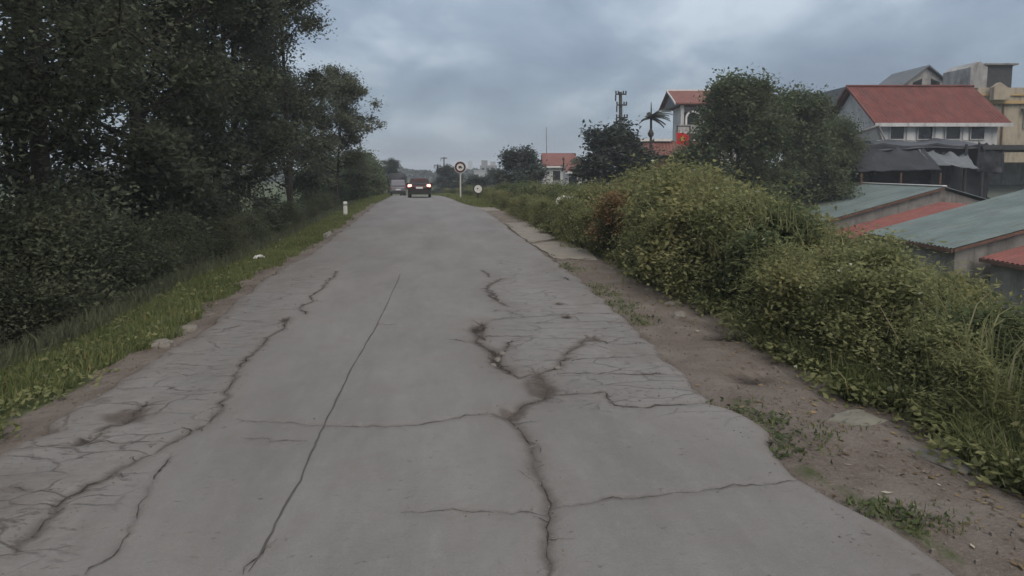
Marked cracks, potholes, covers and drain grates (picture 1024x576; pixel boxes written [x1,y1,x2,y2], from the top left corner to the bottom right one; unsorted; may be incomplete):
crack [241,273,792,576]
crack [16,367,184,570]
crack [183,271,354,436]
